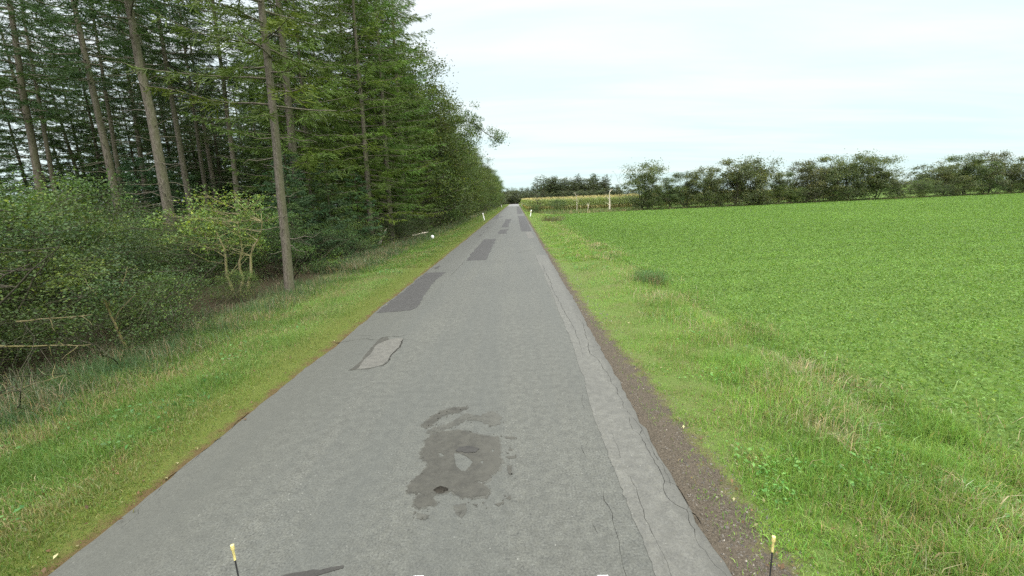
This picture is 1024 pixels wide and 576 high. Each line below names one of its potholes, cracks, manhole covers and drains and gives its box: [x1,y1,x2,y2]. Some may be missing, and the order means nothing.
crack [543,266,721,570]
